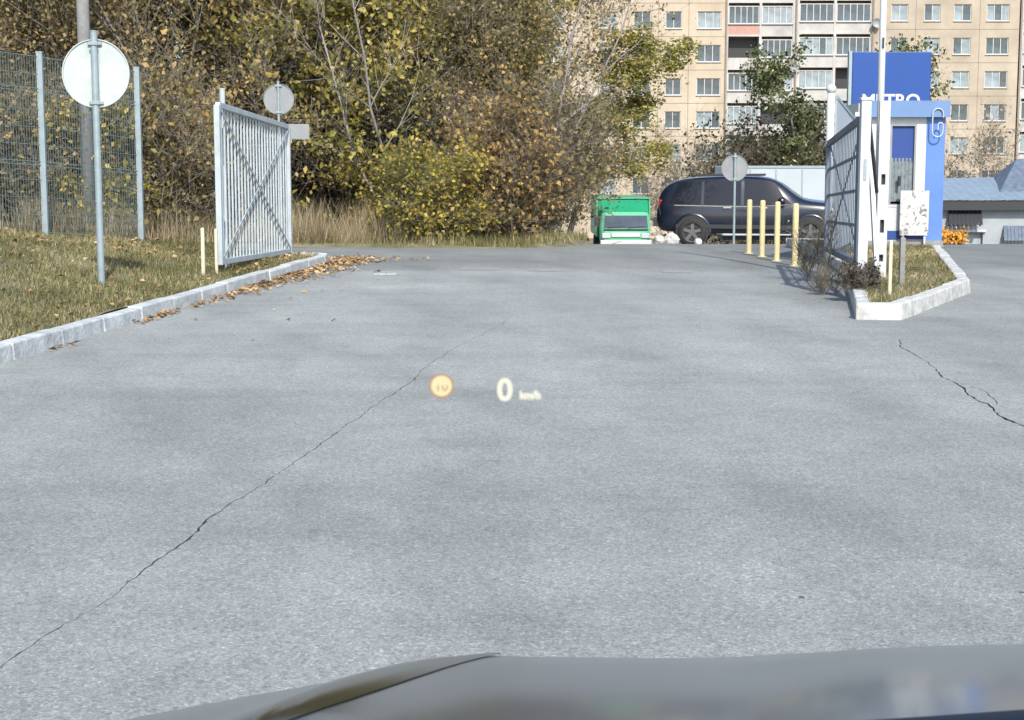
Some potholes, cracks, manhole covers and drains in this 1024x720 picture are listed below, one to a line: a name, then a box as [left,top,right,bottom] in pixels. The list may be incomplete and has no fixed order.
crack [0,315,513,668]
crack [899,340,1024,426]
